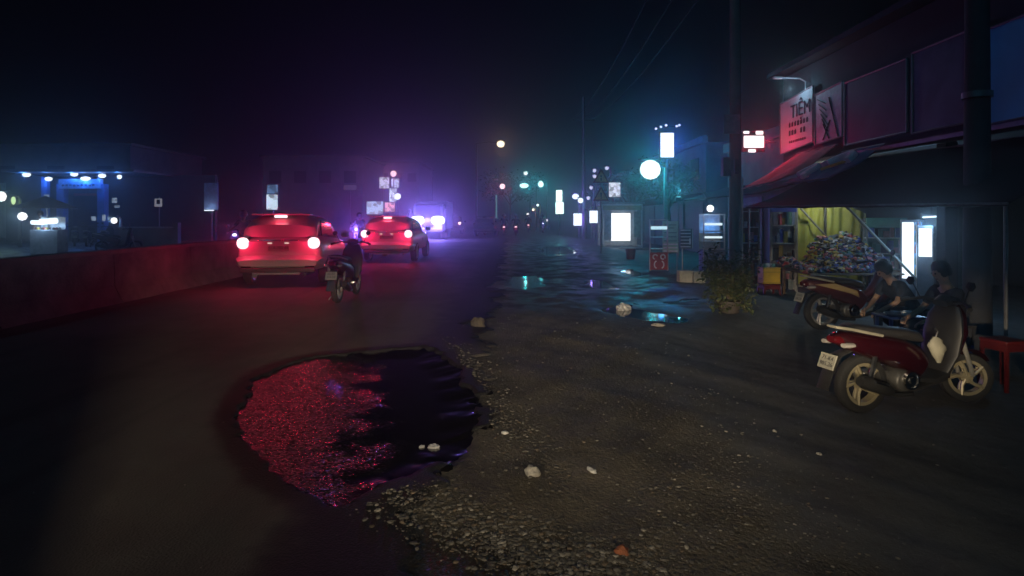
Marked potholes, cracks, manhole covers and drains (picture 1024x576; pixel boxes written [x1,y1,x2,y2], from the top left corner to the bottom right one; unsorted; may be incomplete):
pothole [234,348,494,507]
